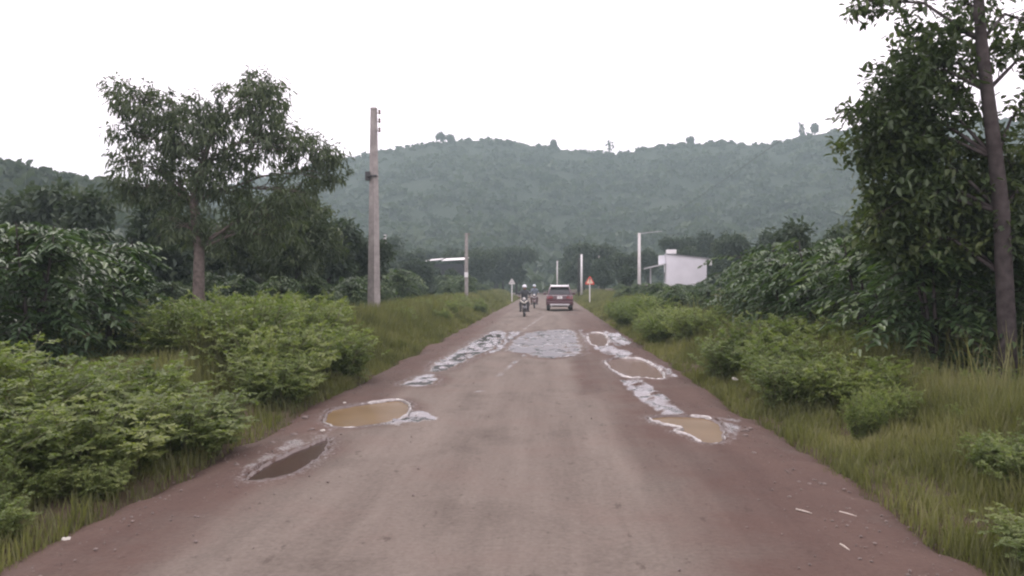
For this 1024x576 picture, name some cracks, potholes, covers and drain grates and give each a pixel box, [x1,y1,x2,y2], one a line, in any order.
pothole [427,330,511,372]
pothole [500,329,588,359]
pothole [604,357,666,379]
pothole [648,414,726,443]
pothole [586,332,610,346]
pothole [397,374,441,387]
pothole [322,398,412,428]
pothole [246,437,330,481]
